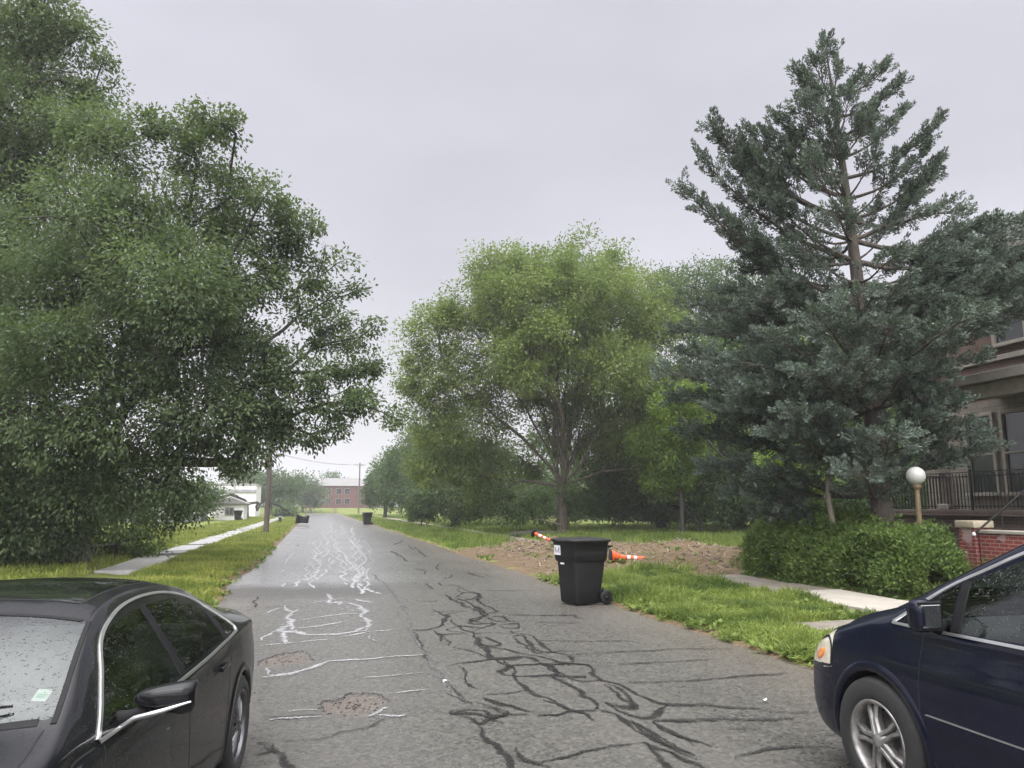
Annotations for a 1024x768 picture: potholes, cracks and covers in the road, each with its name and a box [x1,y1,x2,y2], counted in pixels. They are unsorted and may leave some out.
pothole [317,692,390,718]
pothole [257,651,316,667]
crack [390,540,821,768]
crack [248,518,429,768]
